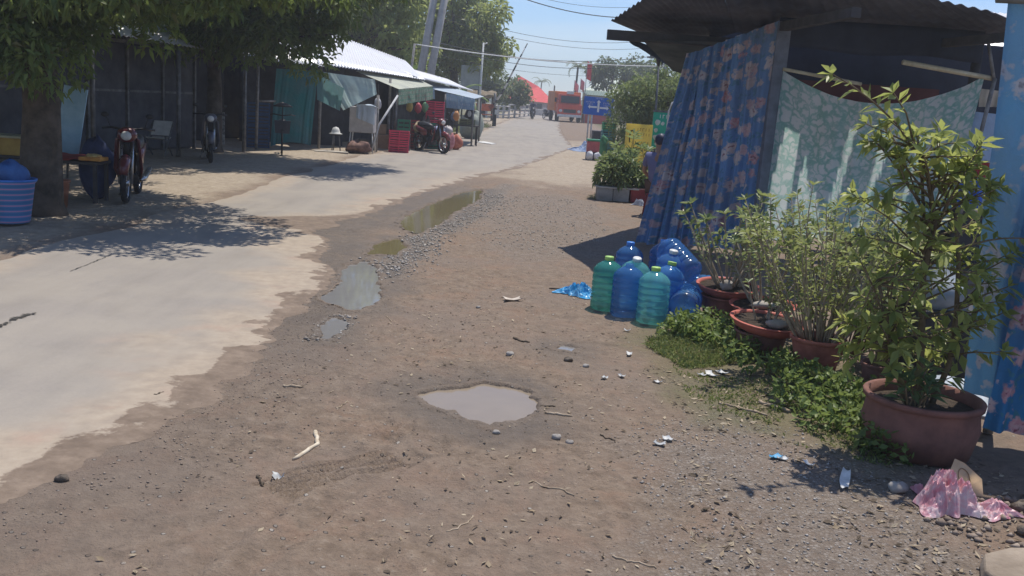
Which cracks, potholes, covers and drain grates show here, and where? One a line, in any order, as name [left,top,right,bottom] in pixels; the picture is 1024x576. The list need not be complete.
pothole [309,314,358,341]
pothole [361,237,414,256]
pothole [394,189,487,234]
pothole [314,259,390,312]
pothole [406,379,547,432]
crack [0,312,36,326]
